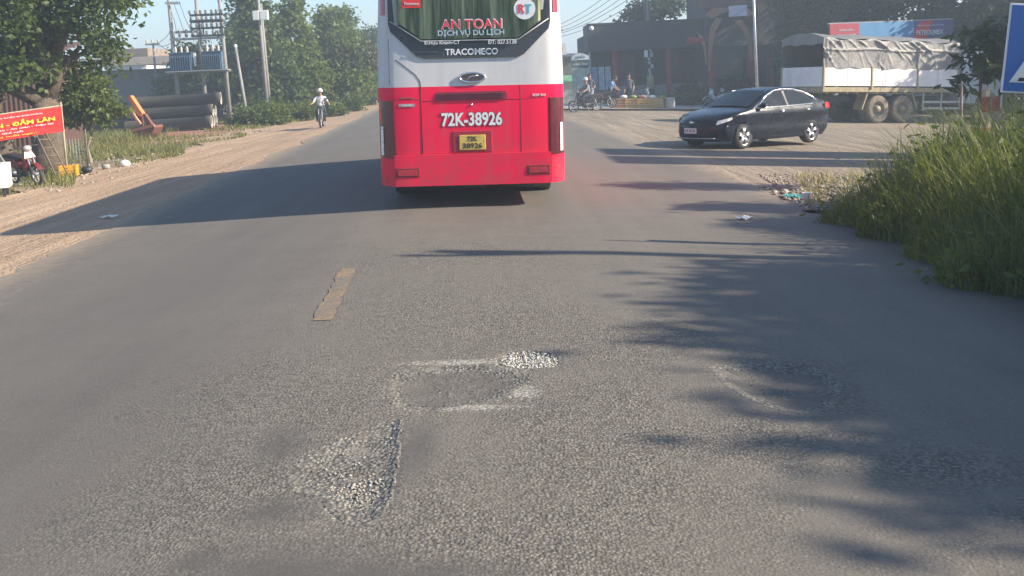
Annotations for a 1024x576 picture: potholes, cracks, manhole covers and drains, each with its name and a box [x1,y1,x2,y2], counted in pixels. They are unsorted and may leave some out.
pothole [497,350,561,370]
pothole [285,416,403,528]
